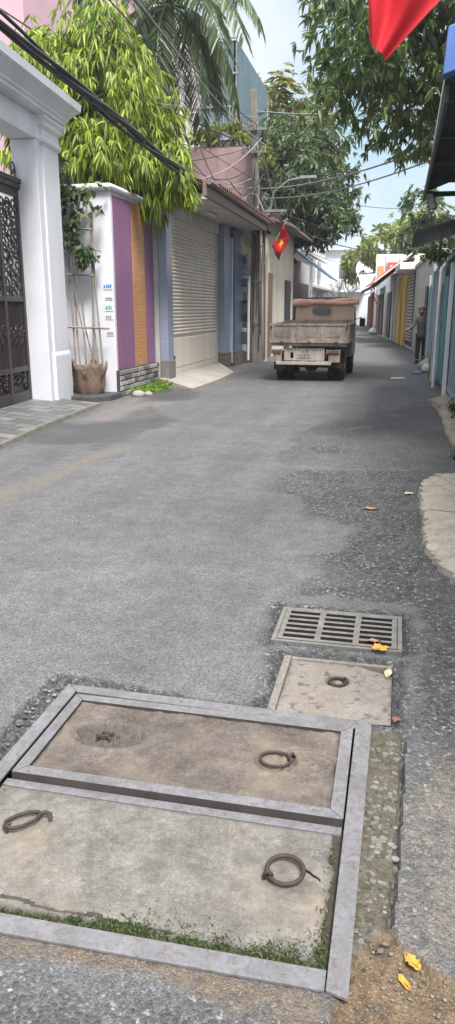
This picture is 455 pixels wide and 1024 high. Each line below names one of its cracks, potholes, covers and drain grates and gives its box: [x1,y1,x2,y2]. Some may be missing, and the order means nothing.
manhole cover [267,655,395,726]
manhole cover [12,694,353,830]
manhole cover [0,778,342,962]
drain grate [271,607,402,656]
